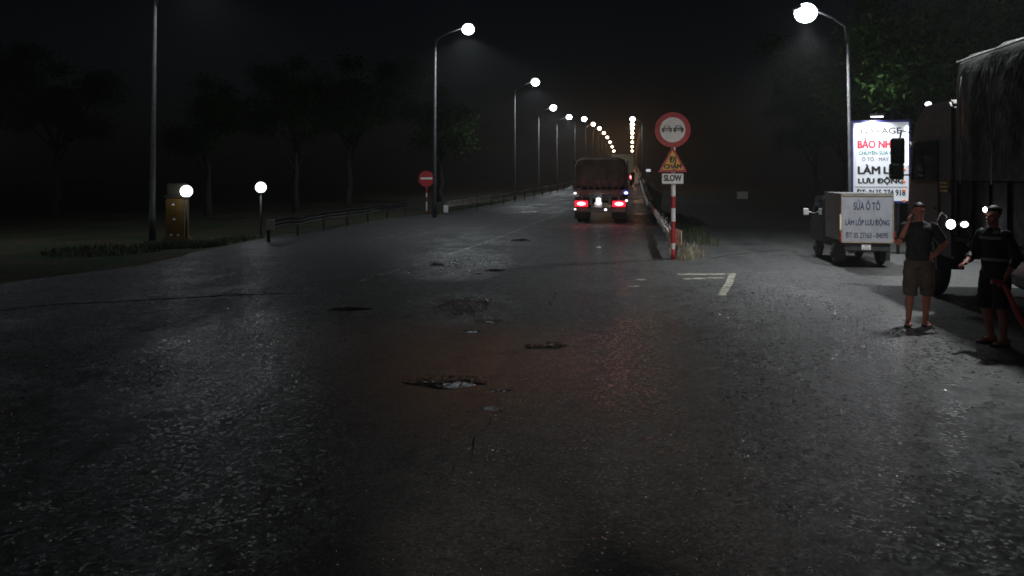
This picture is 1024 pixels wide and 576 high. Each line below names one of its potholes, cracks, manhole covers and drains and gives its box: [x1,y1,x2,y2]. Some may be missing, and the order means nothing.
pothole [400,375,488,389]
pothole [524,342,571,350]
crack [445,418,491,481]
pothole [430,298,496,315]
